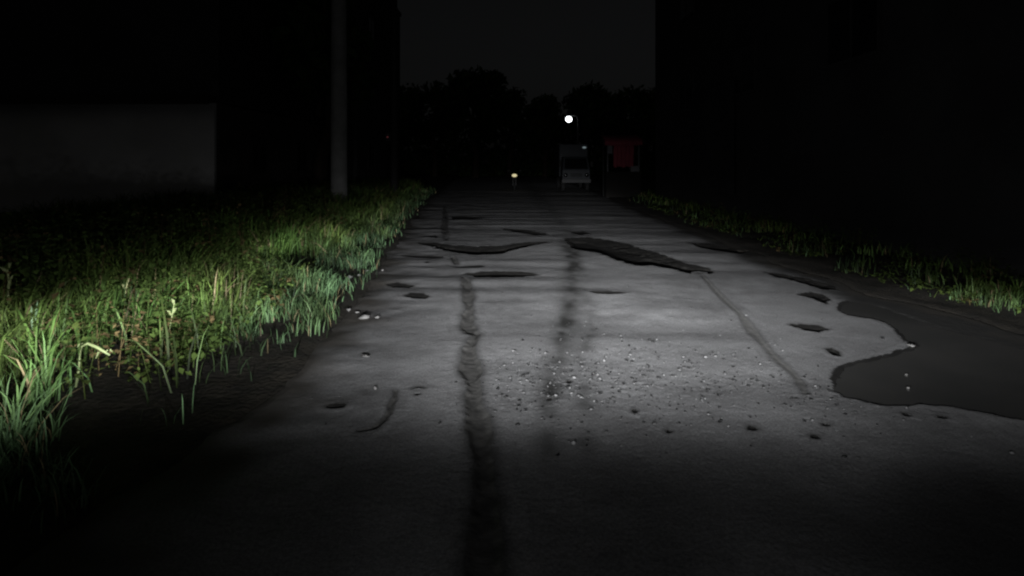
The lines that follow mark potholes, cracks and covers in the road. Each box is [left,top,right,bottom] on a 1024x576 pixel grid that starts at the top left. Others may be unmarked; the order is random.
crack [347,386,408,437]
pothole [789,290,839,306]
pothole [314,399,357,413]
pothole [817,298,1024,424]
pothole [395,291,439,301]
pothole [780,321,841,335]
pothole [455,269,546,278]
pothole [380,281,423,290]
